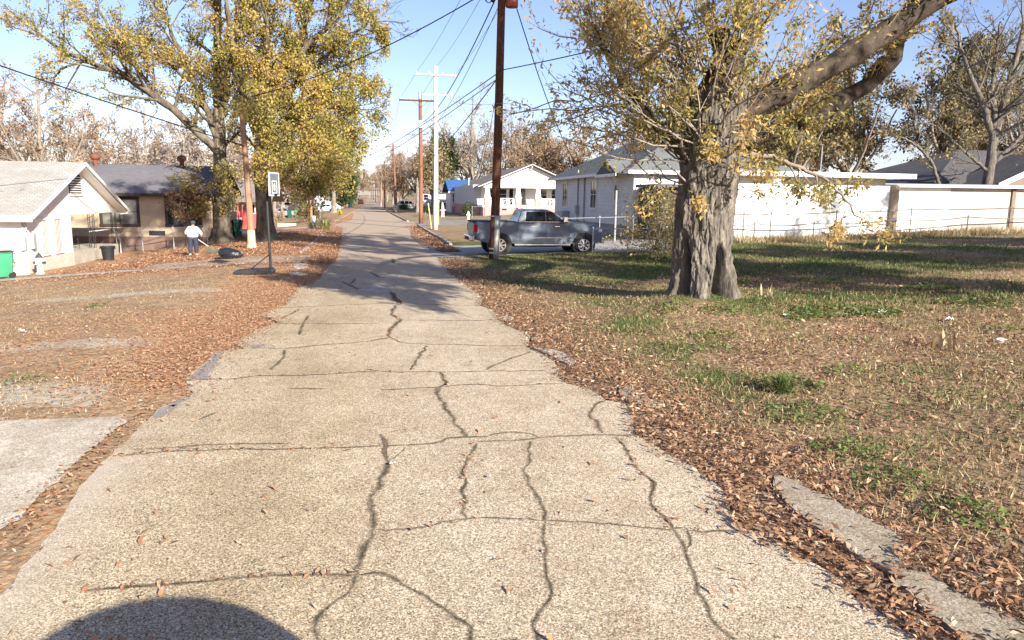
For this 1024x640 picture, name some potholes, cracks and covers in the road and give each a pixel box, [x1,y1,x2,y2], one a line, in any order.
crack [84,258,750,640]
